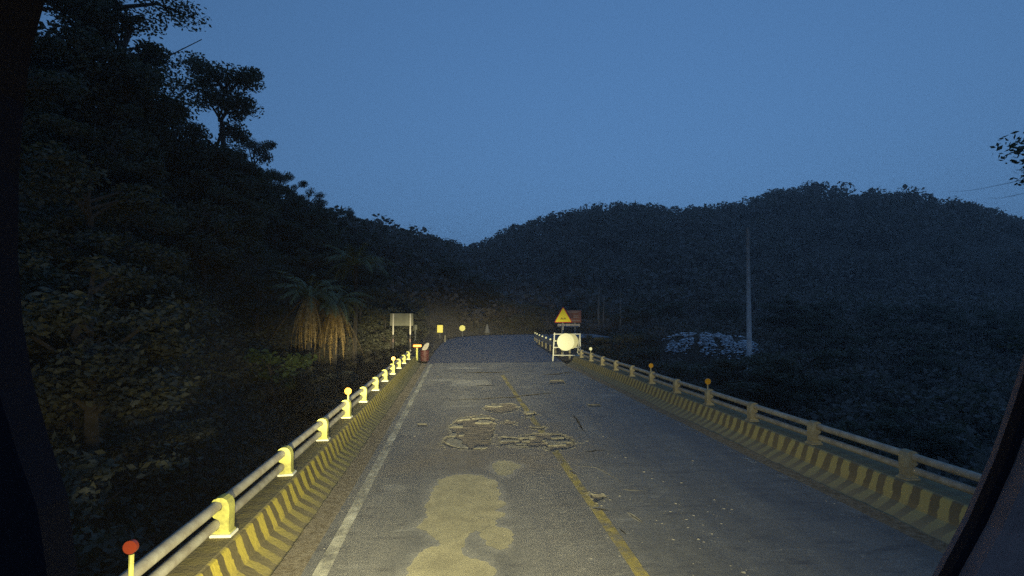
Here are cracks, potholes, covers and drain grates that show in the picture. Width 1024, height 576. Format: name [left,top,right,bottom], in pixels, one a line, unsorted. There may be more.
crack [619,512,642,535]
pothole [494,431,581,453]
pothole [437,415,498,451]
pothole [482,403,521,414]
